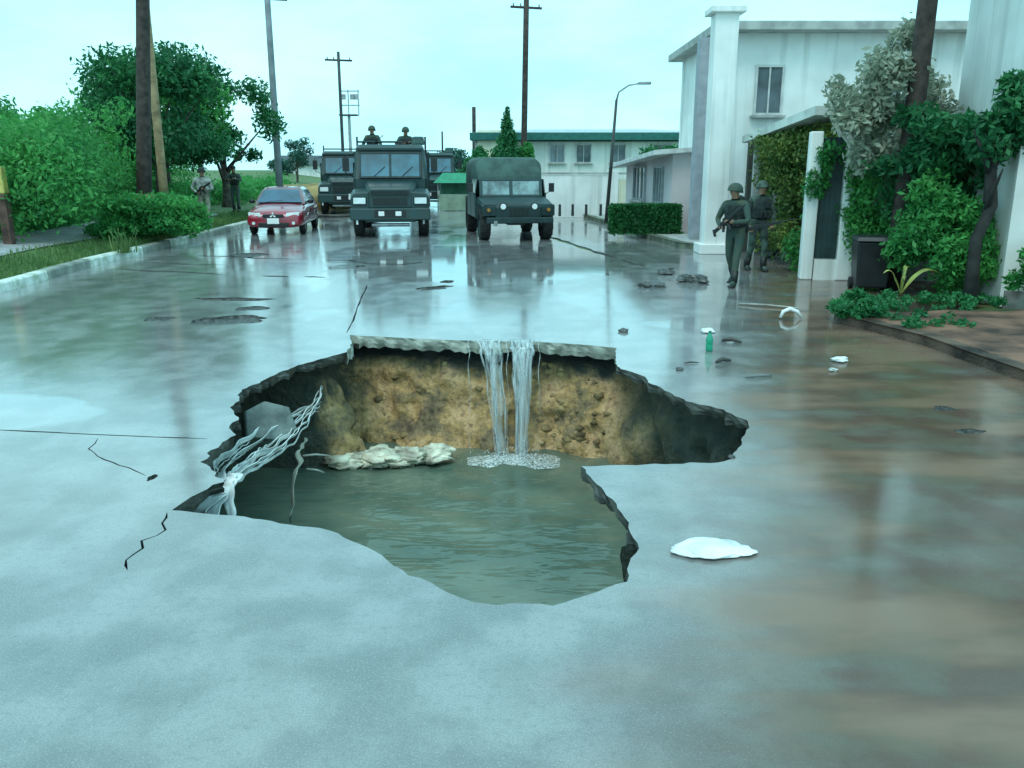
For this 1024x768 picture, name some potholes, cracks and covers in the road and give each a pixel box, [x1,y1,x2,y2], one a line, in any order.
pothole [191,315,267,325]
crack [3,430,207,476]
crack [552,237,657,266]
crack [124,513,168,570]
crack [347,286,367,332]
